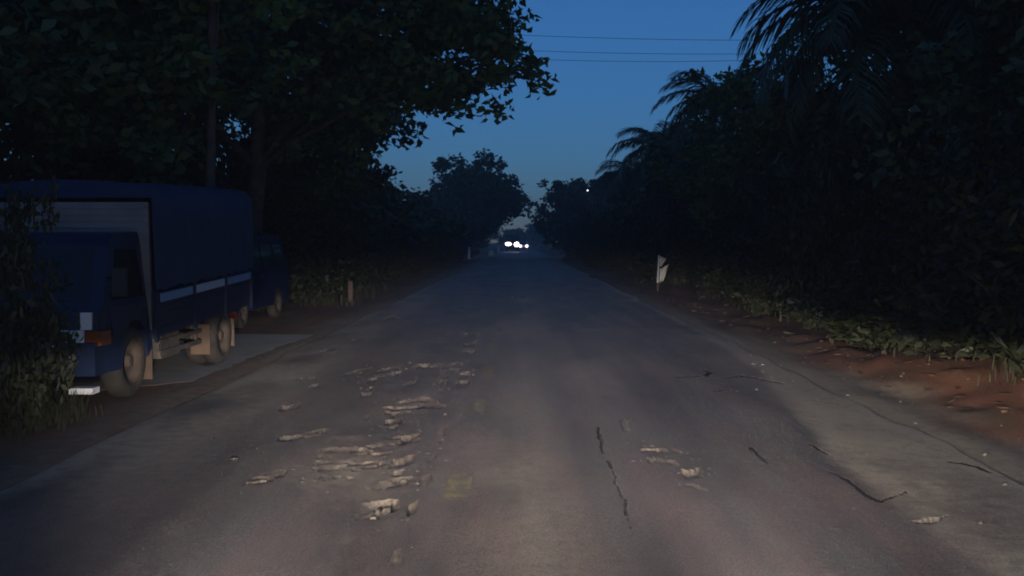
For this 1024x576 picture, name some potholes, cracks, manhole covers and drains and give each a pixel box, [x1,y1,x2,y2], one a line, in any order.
pothole [372,476,415,491]
pothole [679,467,704,480]
crack [946,461,992,474]
crack [748,447,770,464]
pothole [636,445,685,456]
pothole [242,468,289,486]
pothole [363,434,421,449]
crack [674,370,784,392]
pothole [910,515,951,526]
crack [829,472,909,503]
pothole [412,361,465,370]
pothole [383,454,416,469]
